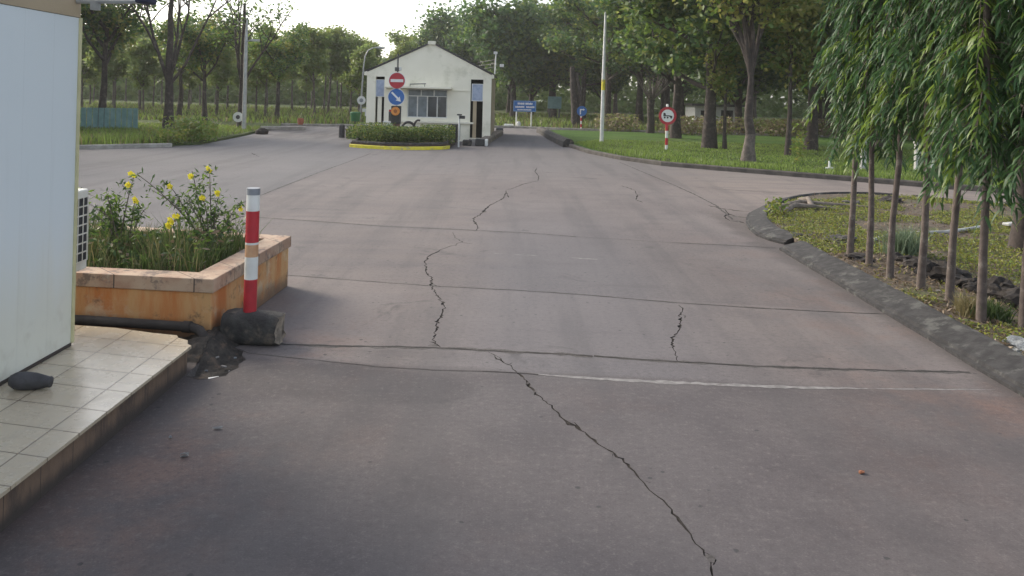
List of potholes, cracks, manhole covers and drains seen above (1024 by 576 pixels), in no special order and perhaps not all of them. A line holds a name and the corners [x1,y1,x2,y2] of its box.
crack [669,305,683,361]
crack [489,352,716,576]
crack [424,168,539,347]
